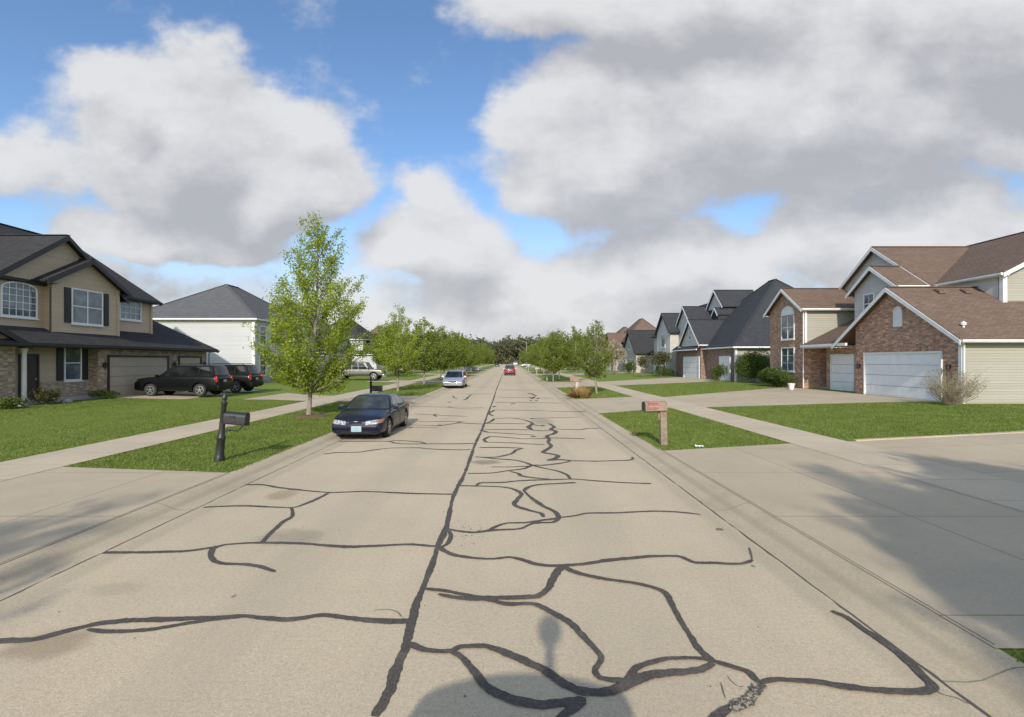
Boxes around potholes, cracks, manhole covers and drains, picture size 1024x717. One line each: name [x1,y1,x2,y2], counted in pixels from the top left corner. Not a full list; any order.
pothole [728,683,767,712]
